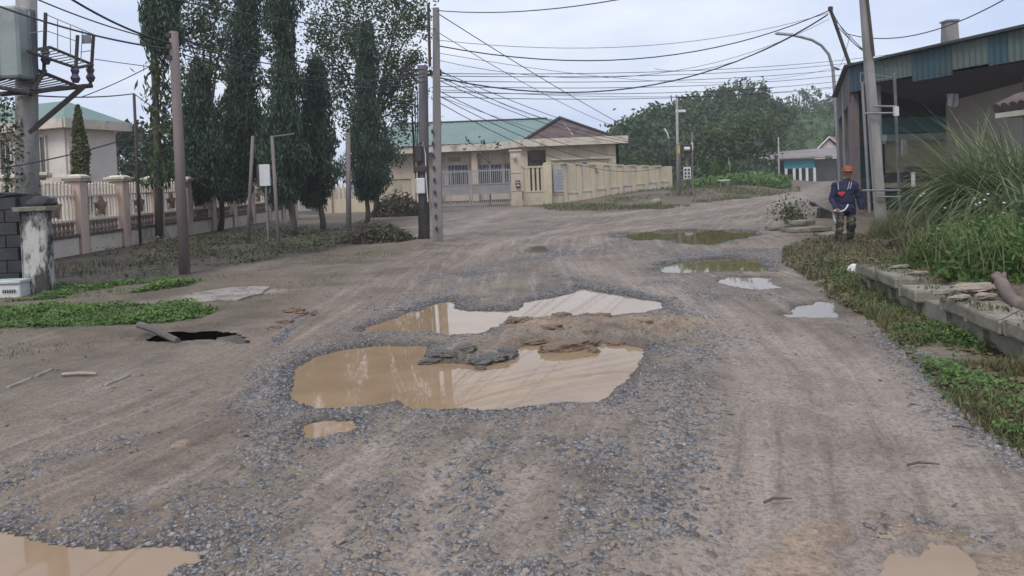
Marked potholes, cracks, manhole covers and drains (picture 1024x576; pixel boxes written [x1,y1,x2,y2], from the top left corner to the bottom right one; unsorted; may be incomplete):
pothole [715,275,788,290]
pothole [280,335,654,412]
pothole [653,255,777,273]
pothole [520,245,552,253]
pothole [0,520,225,576]
pothole [864,530,1005,576]
pothole [354,286,670,335]
pothole [611,228,762,245]
pothole [775,299,863,319]
pothole [123,325,268,346]
pothole [288,414,373,441]
